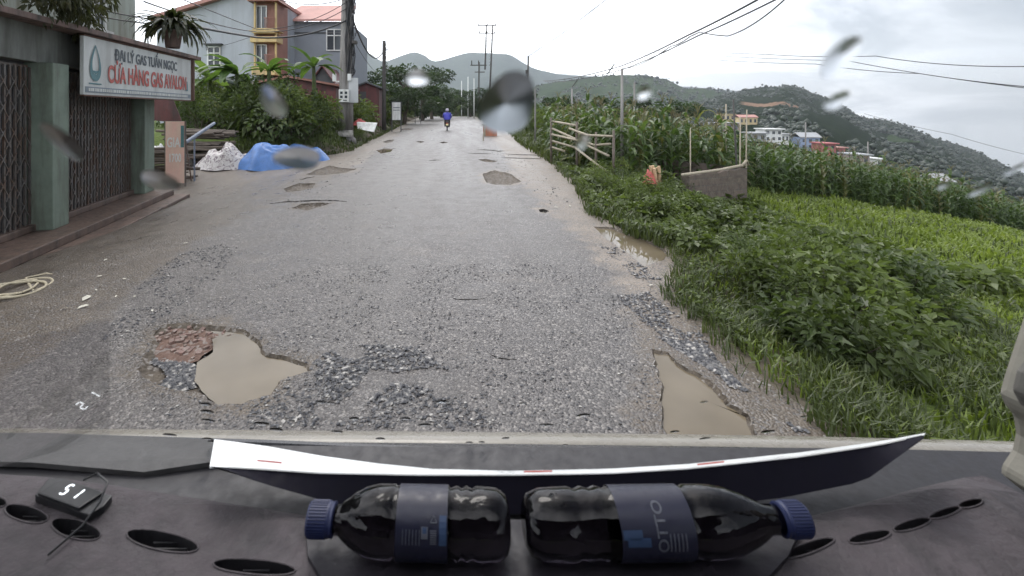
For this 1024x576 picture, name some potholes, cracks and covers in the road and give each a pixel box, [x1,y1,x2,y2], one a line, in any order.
pothole [307,166,355,175]
pothole [593,226,669,266]
pothole [137,322,310,405]
pothole [284,183,315,192]
pothole [652,349,756,435]
pothole [483,170,521,185]
